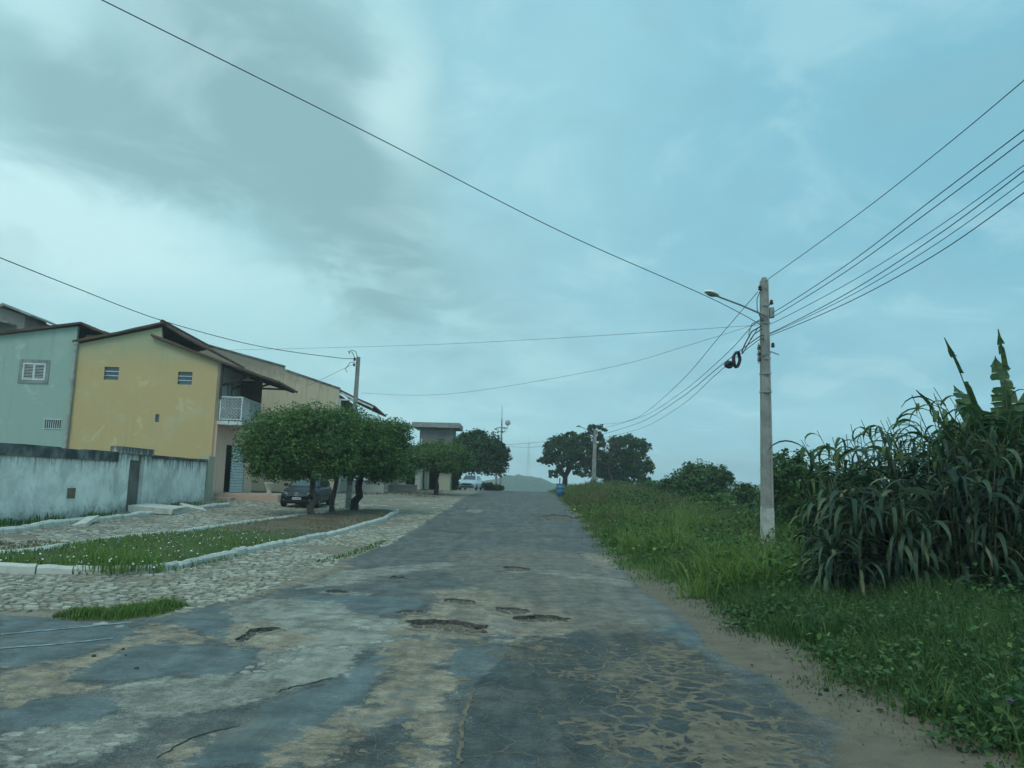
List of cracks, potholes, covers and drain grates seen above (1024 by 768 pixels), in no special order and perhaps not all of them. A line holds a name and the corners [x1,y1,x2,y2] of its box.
pothole [212,623,301,645]
pothole [380,615,509,635]
pothole [503,613,580,626]
pothole [487,563,551,574]
pothole [484,605,541,616]
pothole [385,608,438,617]
pothole [433,597,487,608]
crack [366,619,841,768]
pothole [313,588,361,596]
pothole [529,514,580,522]
crack [157,725,241,758]
